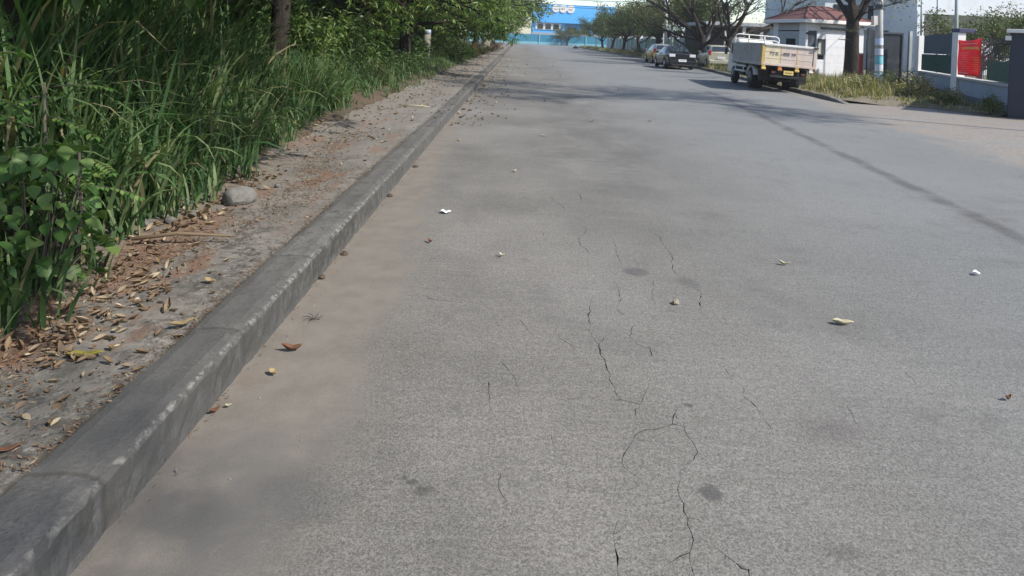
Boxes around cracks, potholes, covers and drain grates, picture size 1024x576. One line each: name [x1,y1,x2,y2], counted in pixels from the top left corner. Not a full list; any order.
crack [559,296,698,576]
